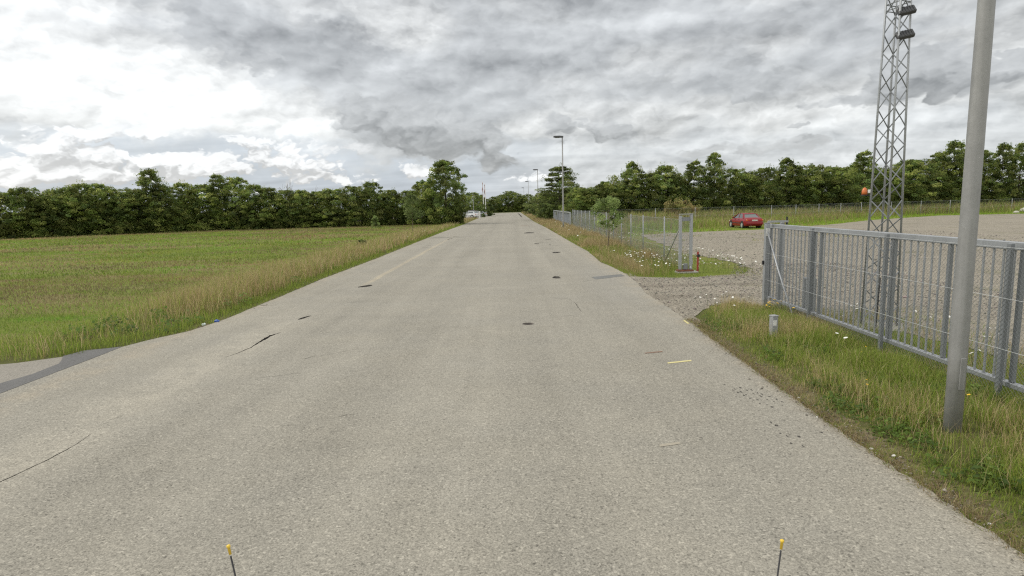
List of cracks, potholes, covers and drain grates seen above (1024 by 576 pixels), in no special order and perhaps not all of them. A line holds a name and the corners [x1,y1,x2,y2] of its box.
crack [0,417,118,482]
